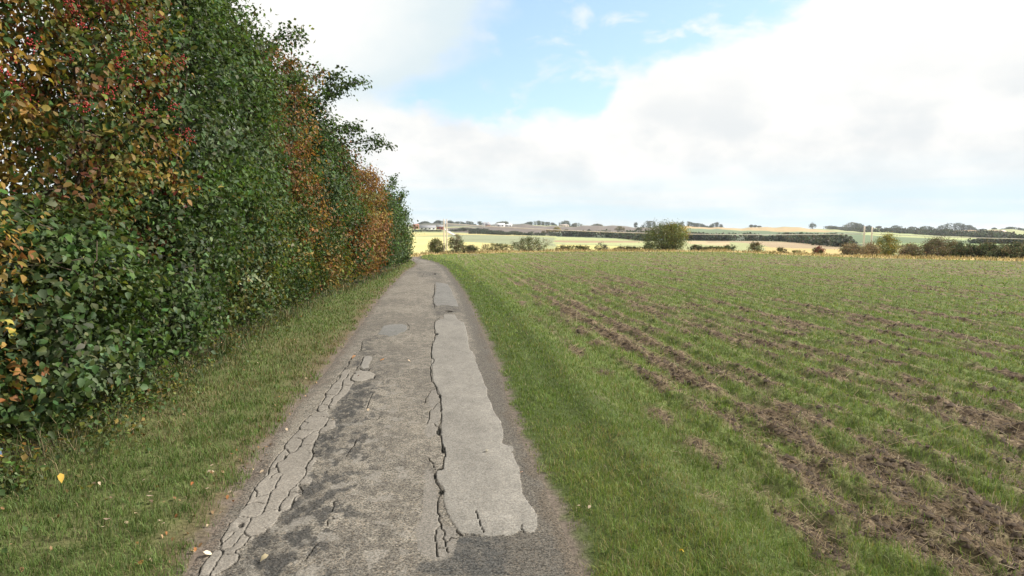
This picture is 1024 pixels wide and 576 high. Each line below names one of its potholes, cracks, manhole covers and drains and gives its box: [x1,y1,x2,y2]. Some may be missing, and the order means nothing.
crack [422,276,484,558]
crack [199,347,375,576]
